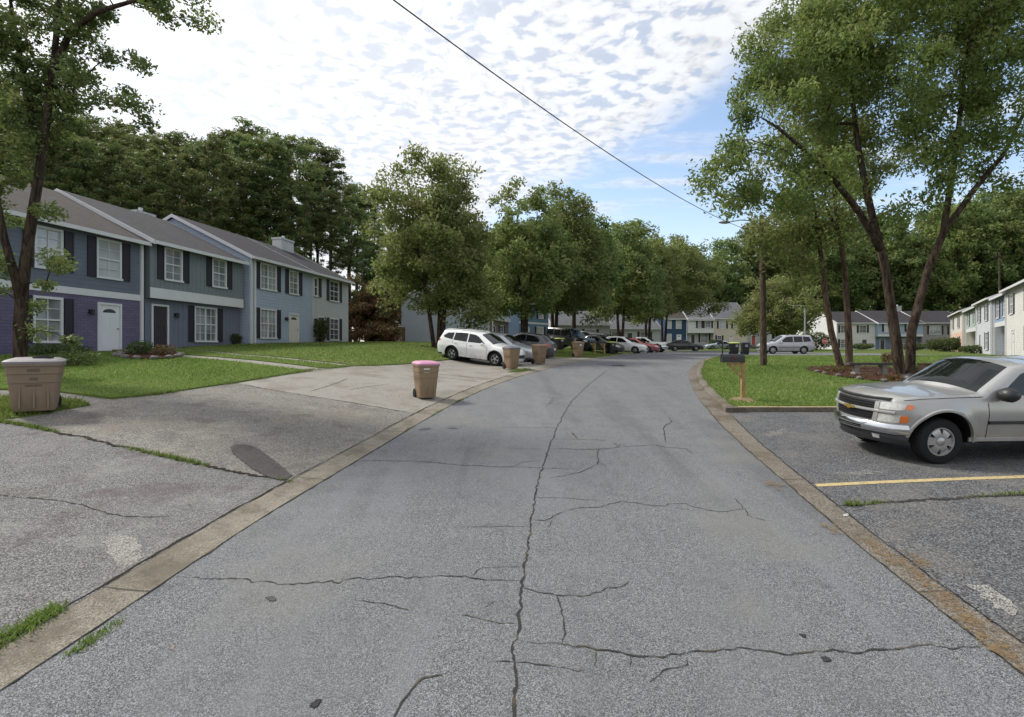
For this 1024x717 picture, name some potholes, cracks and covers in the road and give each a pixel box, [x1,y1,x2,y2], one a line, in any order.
crack [183,369,979,717]
crack [4,495,167,517]
